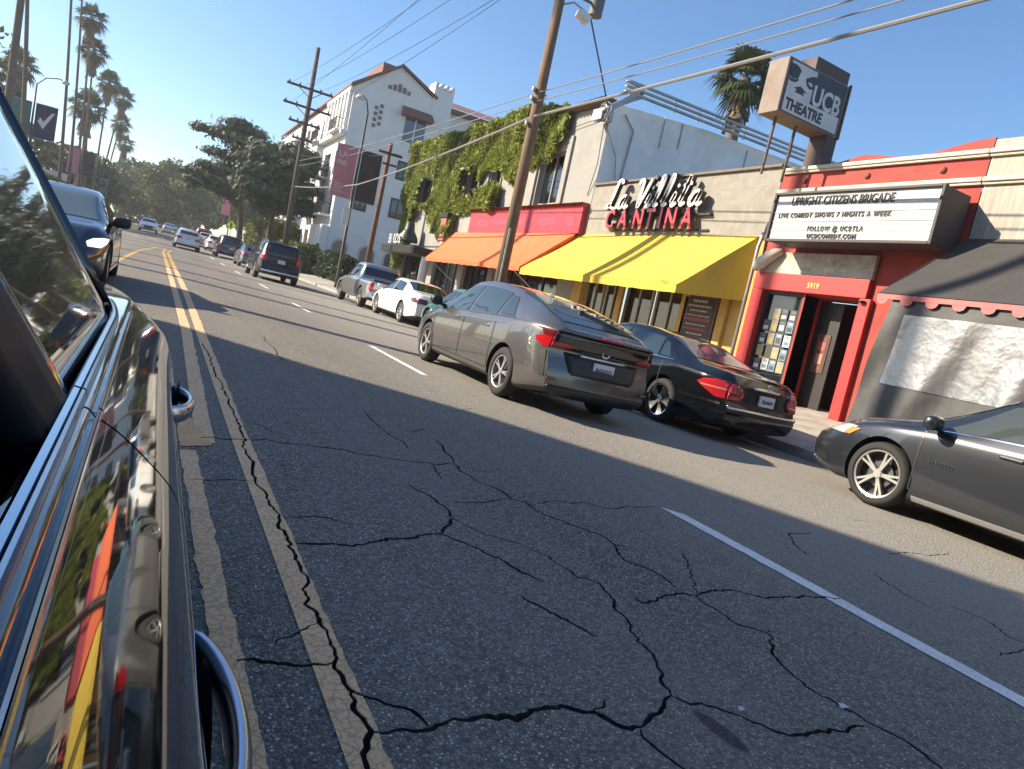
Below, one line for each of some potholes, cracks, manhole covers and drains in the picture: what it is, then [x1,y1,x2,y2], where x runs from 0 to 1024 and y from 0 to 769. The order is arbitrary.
crack [202,344,943,769]
crack [954,607,1024,656]
